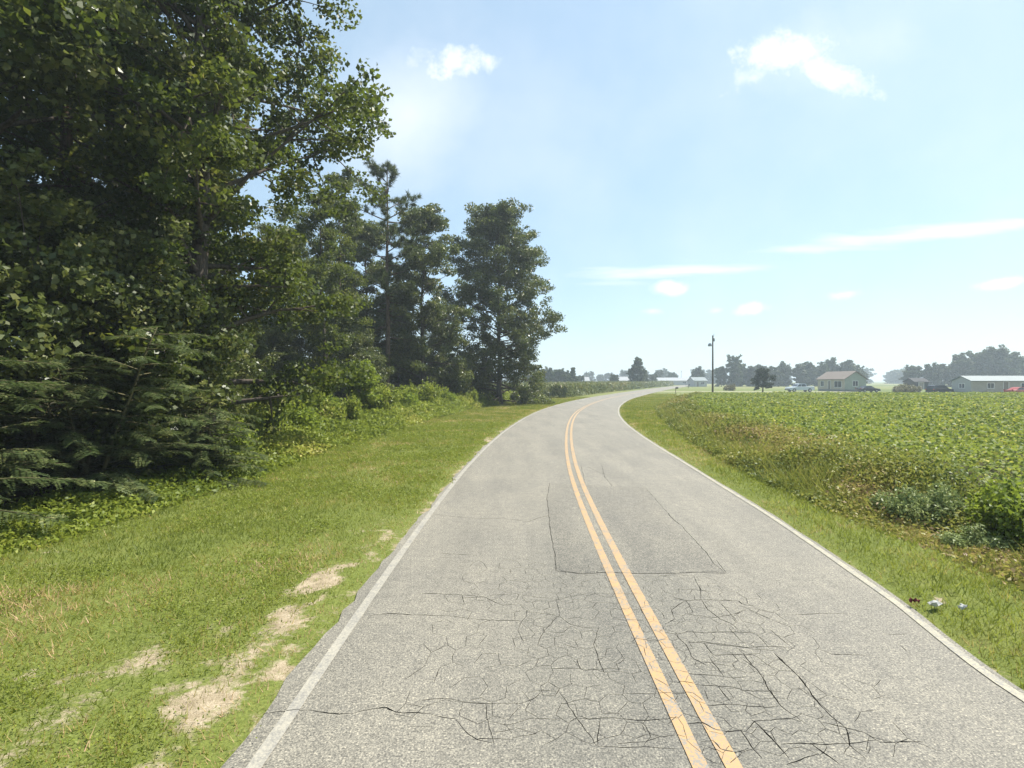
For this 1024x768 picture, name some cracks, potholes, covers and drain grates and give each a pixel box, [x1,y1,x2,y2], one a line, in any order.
crack [623,575,933,765]
crack [264,560,680,749]
